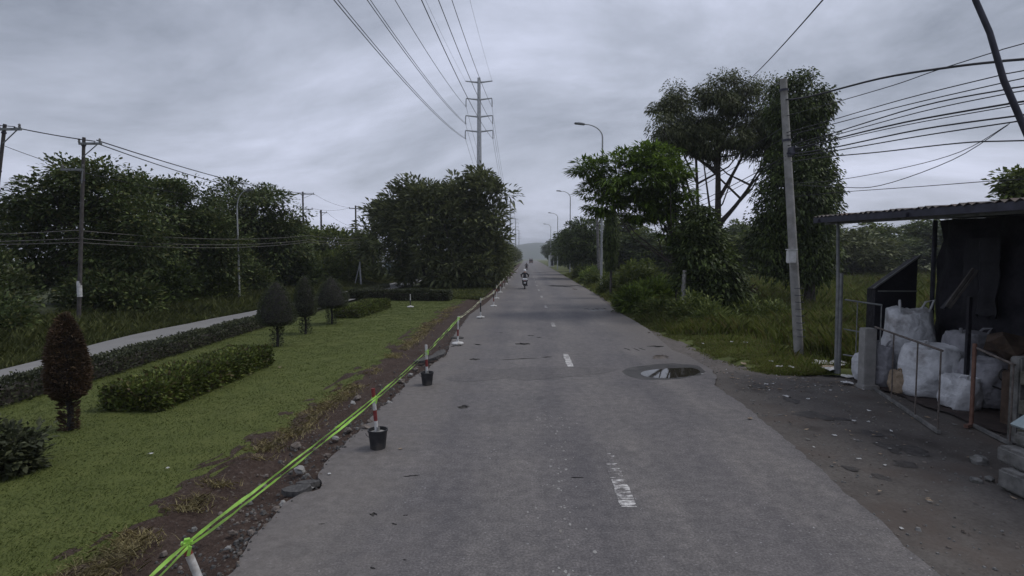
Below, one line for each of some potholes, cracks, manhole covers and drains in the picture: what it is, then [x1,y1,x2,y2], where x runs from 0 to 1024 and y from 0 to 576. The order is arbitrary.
pothole [622,363,706,380]
